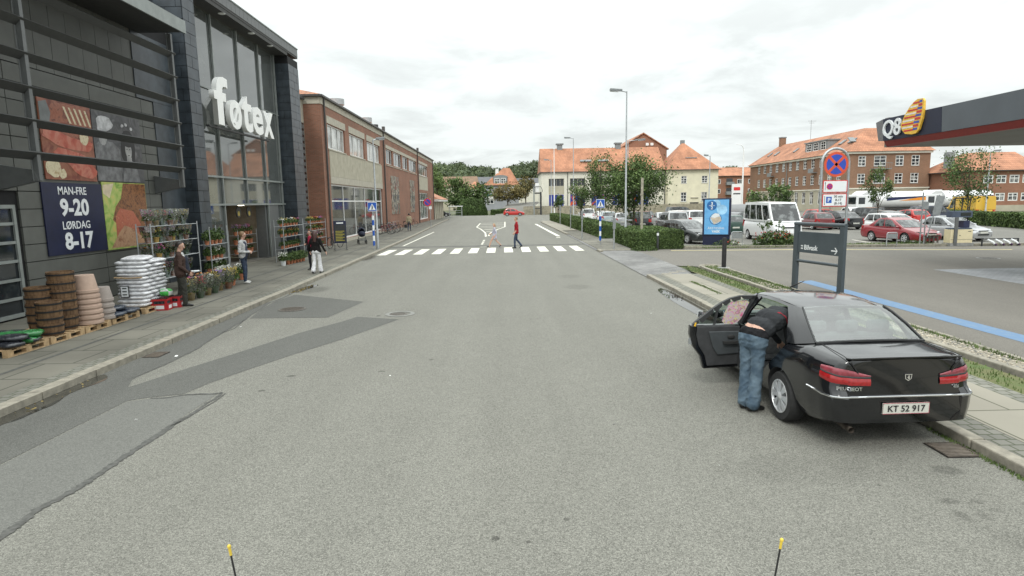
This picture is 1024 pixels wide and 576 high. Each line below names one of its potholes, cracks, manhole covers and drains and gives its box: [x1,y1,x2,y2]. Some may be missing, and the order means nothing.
drain grate [923,442,982,458]
